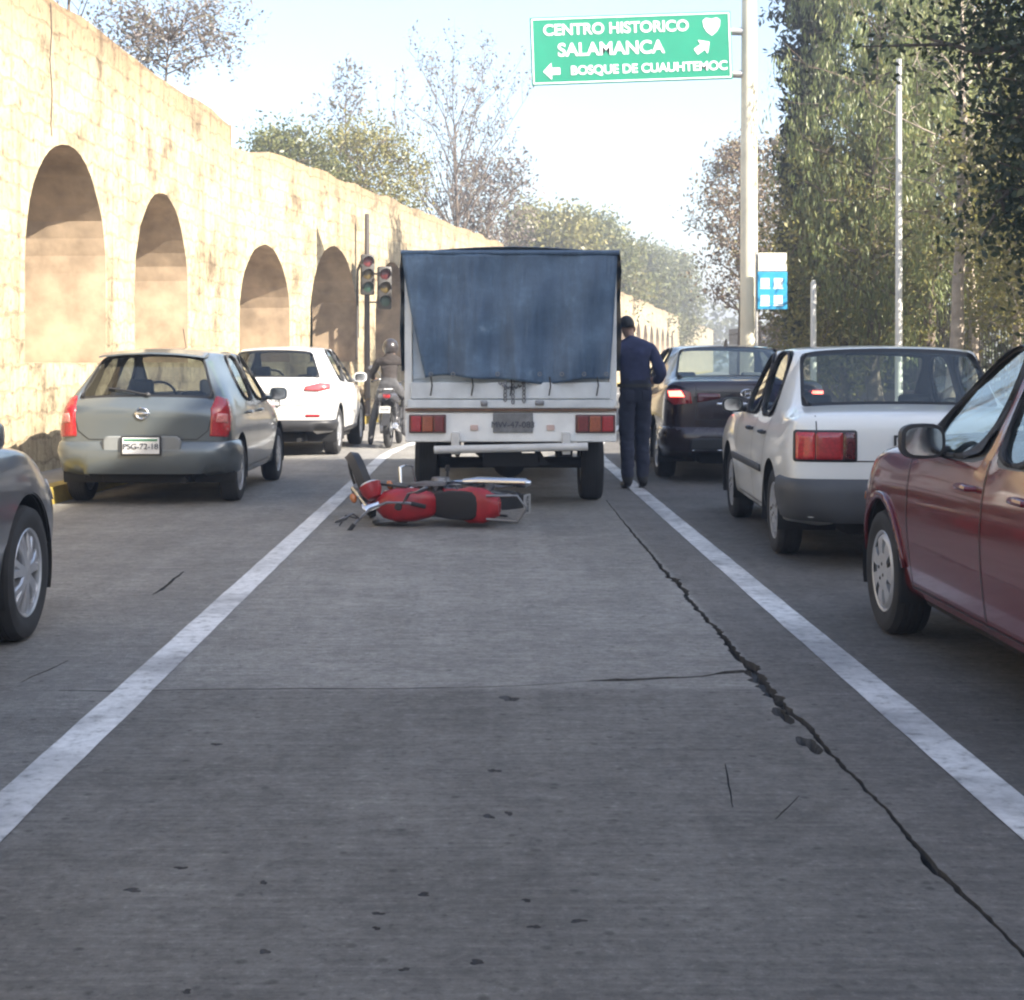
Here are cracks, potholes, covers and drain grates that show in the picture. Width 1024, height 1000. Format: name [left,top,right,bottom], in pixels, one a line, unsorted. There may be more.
crack [725,764,733,807]
crack [591,670,752,681]
crack [152,571,184,595]
